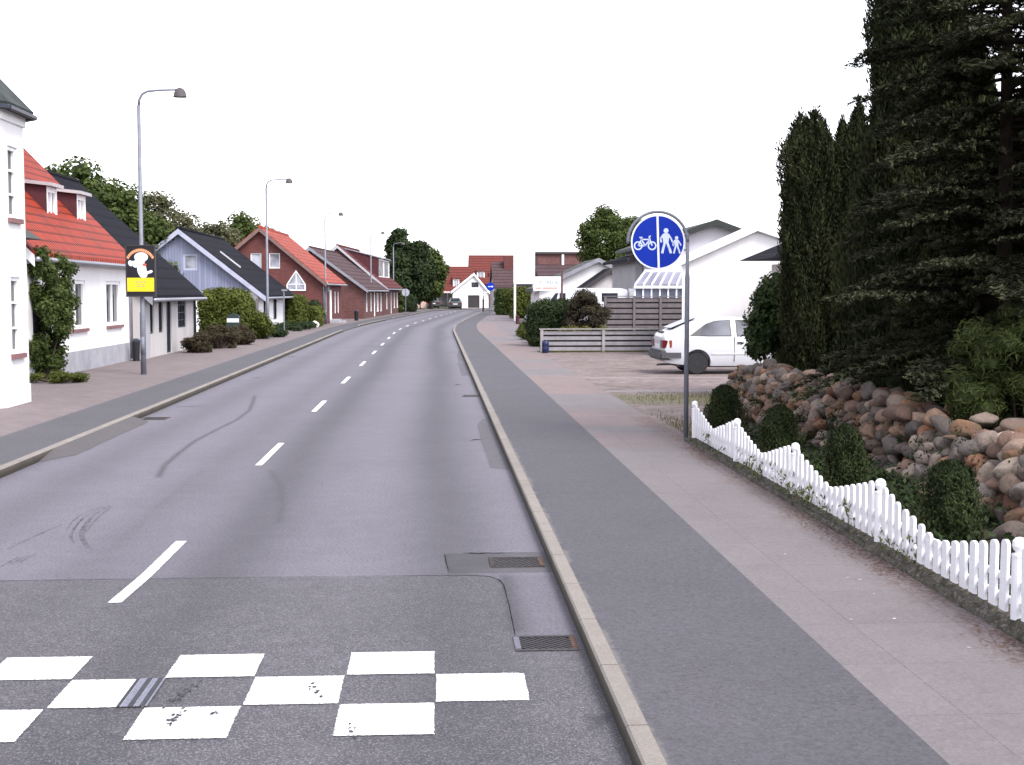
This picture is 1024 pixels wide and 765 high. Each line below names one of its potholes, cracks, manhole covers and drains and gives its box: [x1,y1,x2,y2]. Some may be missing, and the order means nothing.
drain grate [512,635,580,652]
drain grate [488,557,545,568]
